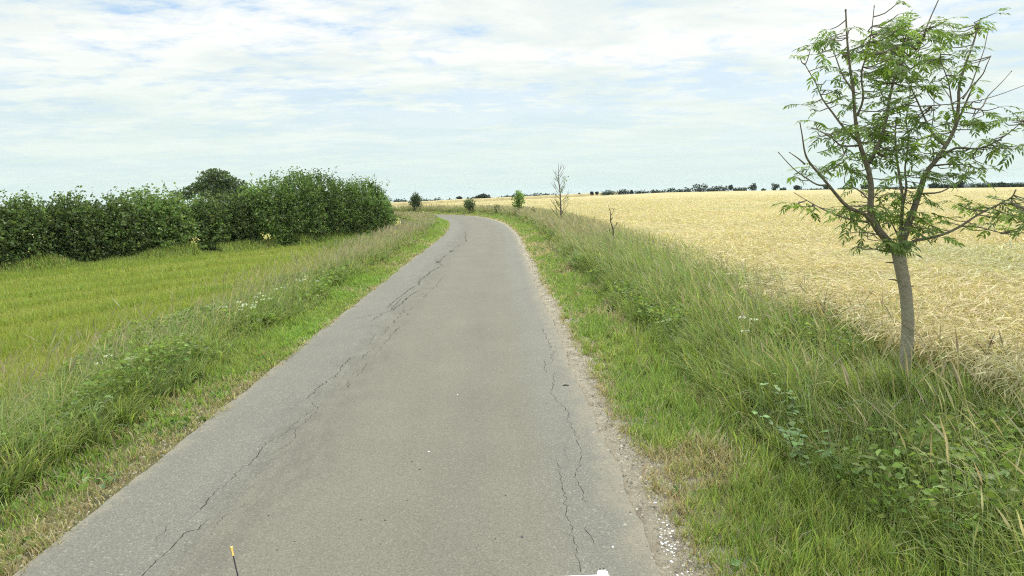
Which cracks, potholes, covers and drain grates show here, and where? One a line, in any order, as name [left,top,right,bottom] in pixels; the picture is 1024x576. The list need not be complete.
crack [542,329,594,572]
crack [142,231,467,576]
